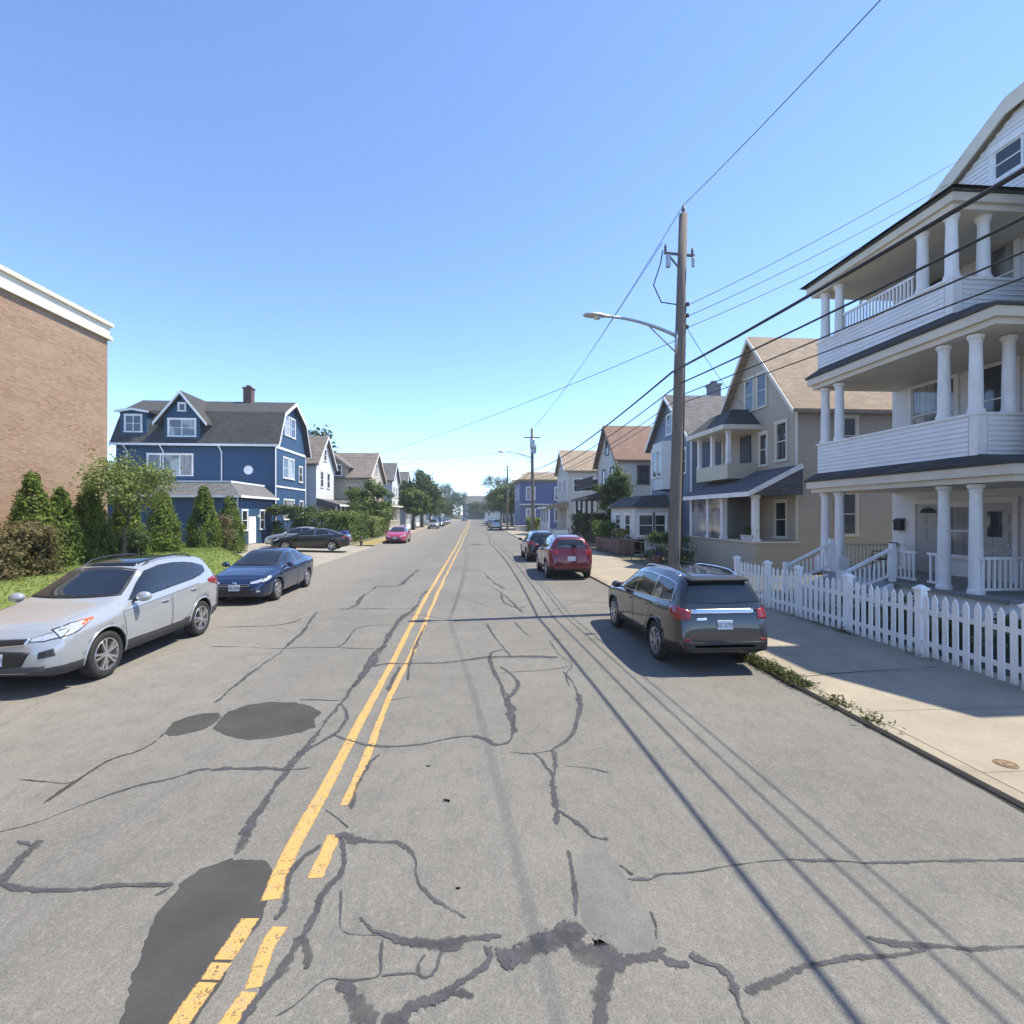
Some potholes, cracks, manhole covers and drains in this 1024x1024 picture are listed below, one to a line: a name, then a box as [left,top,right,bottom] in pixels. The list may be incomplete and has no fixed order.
crack [239,755,502,1024]
crack [407,614,443,680]
manhole cover [992,759,1020,769]
crack [649,911,657,938]
crack [20,732,165,803]
crack [472,573,608,840]
crack [348,570,420,609]
crack [620,857,1024,881]
